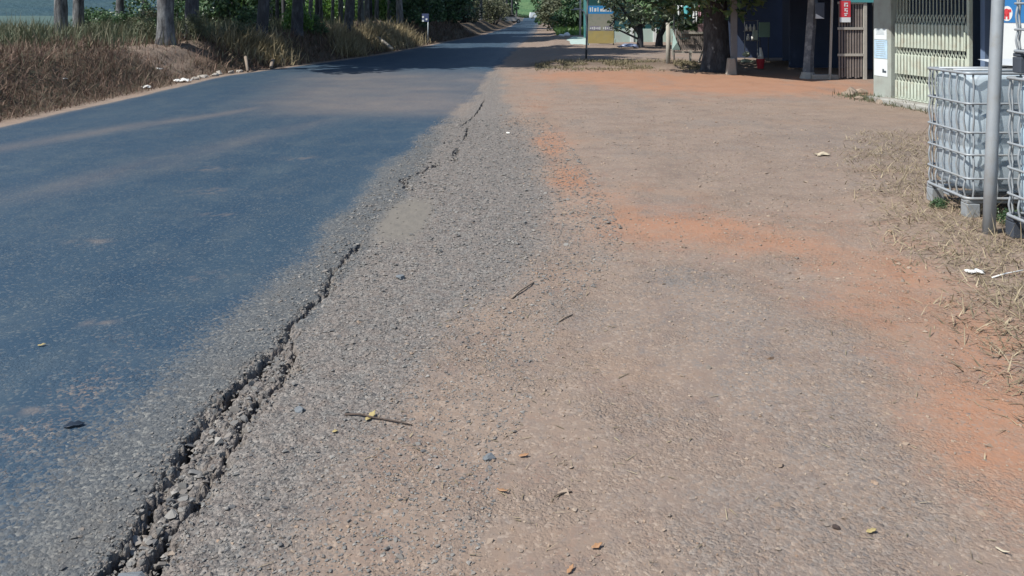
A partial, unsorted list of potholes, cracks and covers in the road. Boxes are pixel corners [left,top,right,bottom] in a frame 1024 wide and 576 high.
crack [79,242,365,576]
crack [398,100,485,191]
